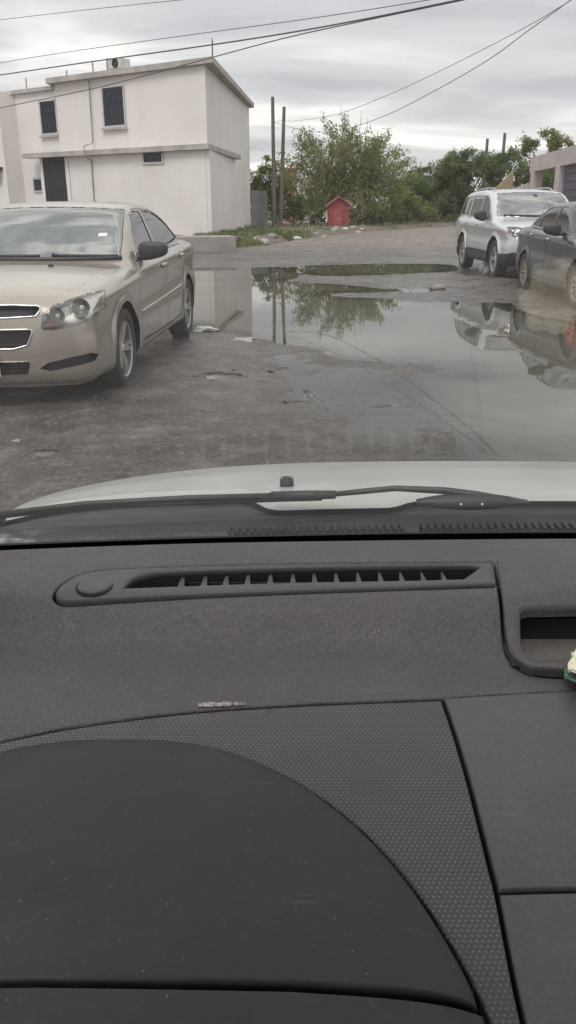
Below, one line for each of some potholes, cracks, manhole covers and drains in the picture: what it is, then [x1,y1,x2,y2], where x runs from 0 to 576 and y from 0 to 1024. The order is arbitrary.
pothole [26,449,65,457]
pothole [198,371,248,381]
